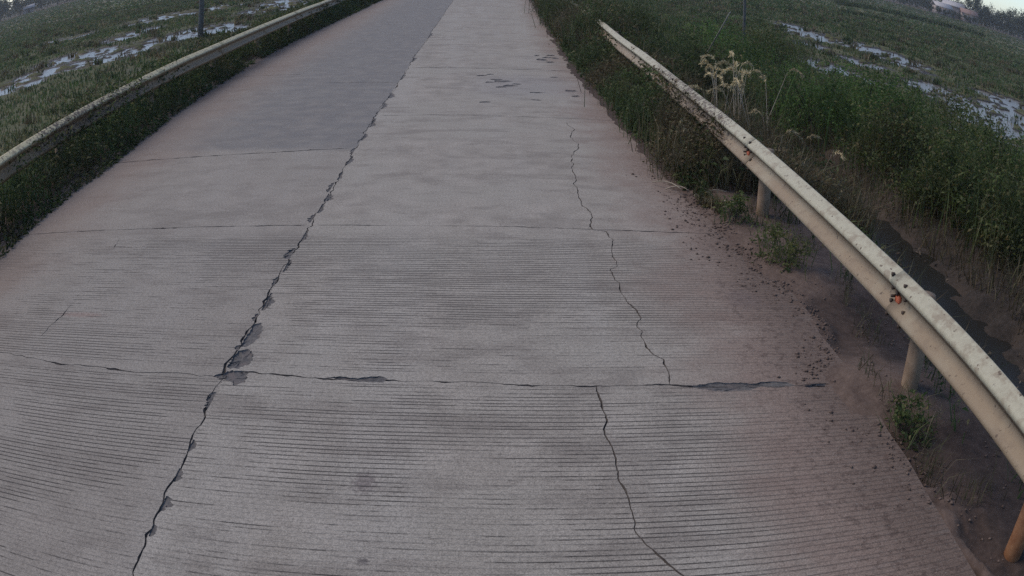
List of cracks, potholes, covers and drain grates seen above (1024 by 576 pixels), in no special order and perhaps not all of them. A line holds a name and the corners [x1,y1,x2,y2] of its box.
crack [566,122,670,384]
crack [596,385,684,576]
crack [132,4,451,576]
